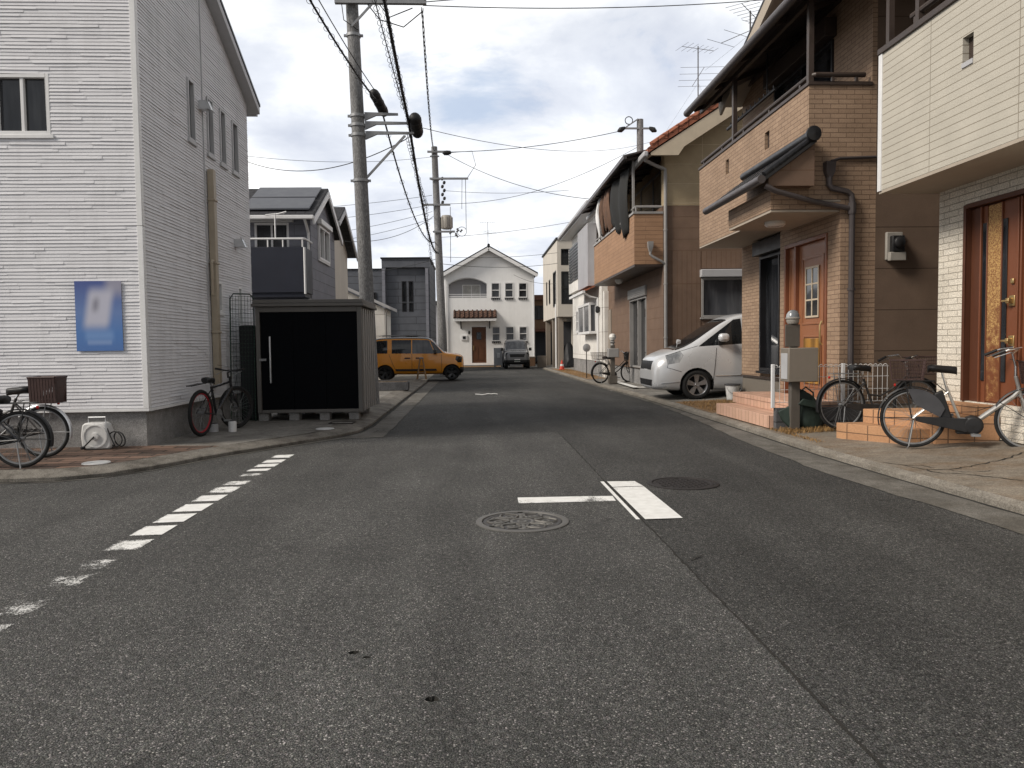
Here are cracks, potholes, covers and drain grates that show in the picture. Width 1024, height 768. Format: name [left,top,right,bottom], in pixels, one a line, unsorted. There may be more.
crack [884,452,1023,481]
manhole cover [476,511,569,533]
manhole cover [647,477,720,490]
